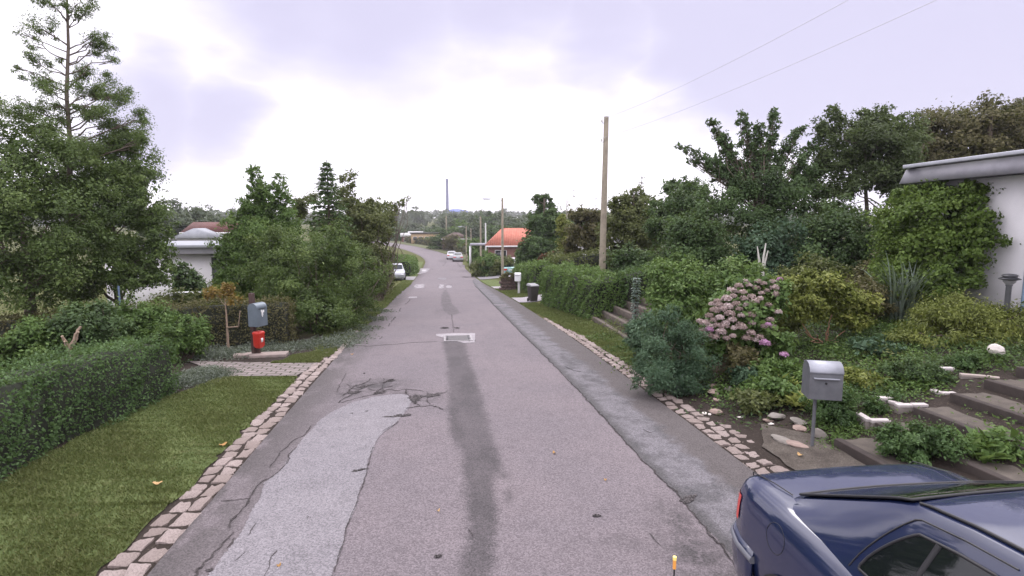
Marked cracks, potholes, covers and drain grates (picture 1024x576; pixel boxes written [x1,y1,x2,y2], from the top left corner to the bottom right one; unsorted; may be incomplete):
crack [194,426,311,576]
crack [337,374,445,431]
